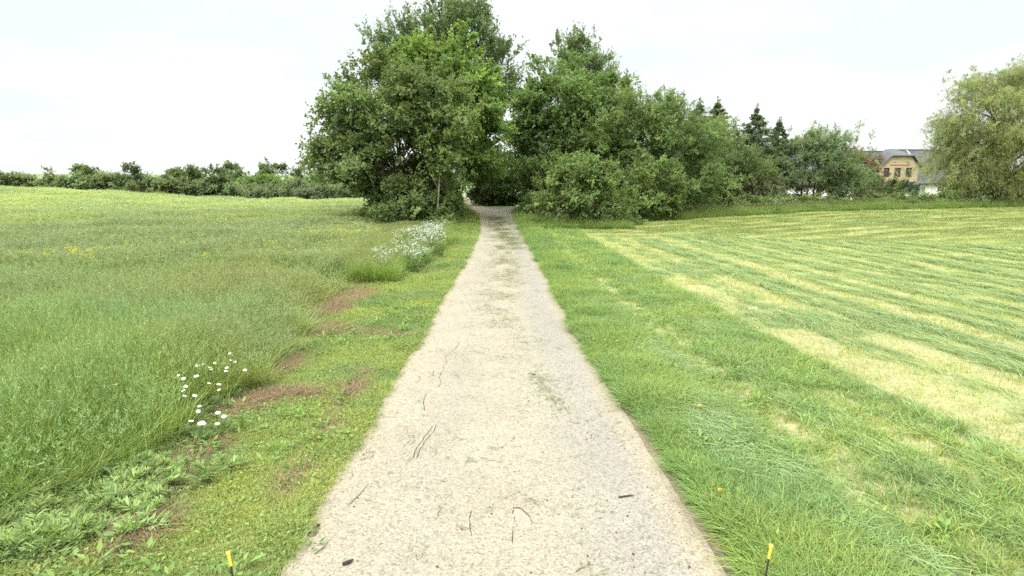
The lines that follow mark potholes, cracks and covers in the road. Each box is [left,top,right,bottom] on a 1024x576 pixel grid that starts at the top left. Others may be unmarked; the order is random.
crack [403,342,460,459]
